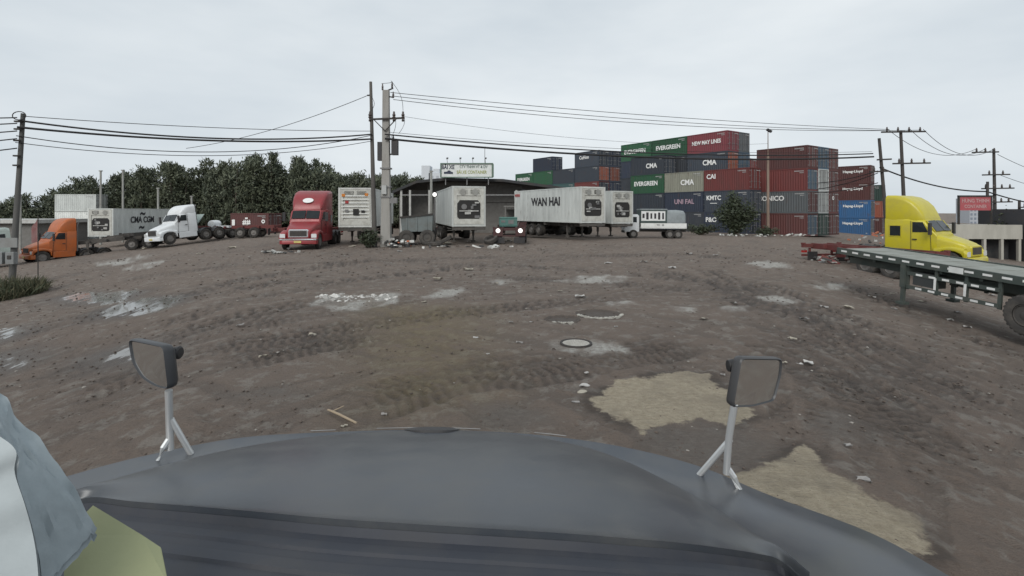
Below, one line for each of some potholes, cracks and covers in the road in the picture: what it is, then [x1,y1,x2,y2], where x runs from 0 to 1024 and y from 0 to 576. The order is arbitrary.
manhole cover [560,338,592,348]
